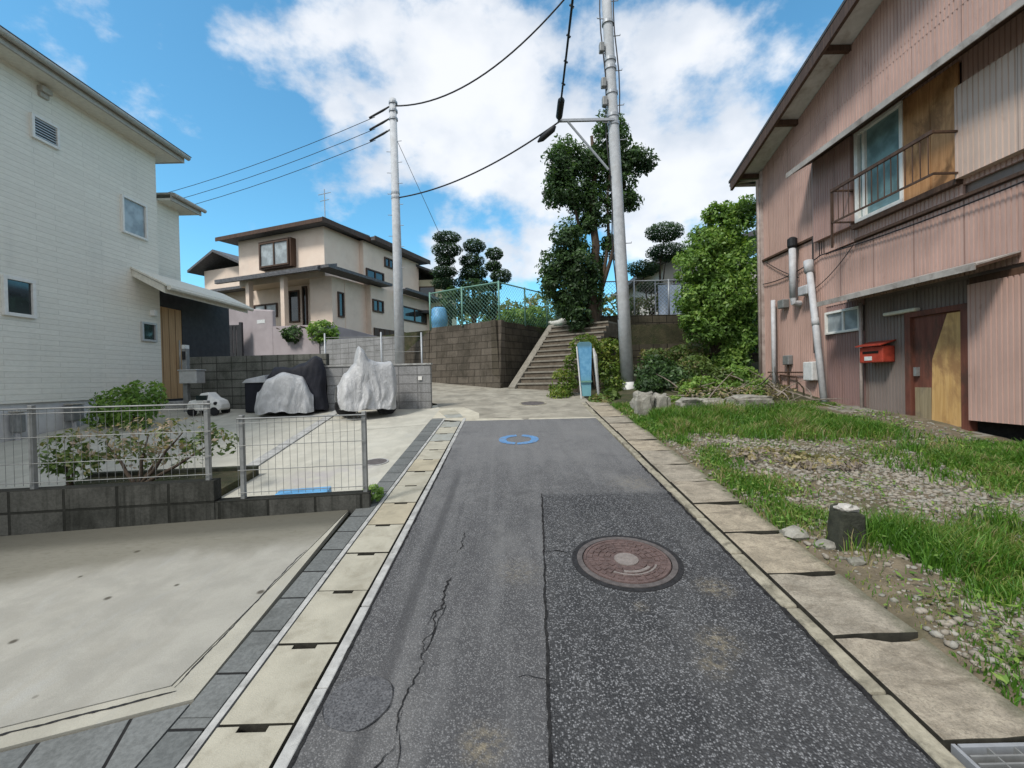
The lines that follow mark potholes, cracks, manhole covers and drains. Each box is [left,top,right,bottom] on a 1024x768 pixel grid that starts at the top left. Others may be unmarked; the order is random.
manhole cover [368,458,389,466]
crack [0,447,466,768]
manhole cover [572,535,684,592]
drain grate [951,742,1024,768]
